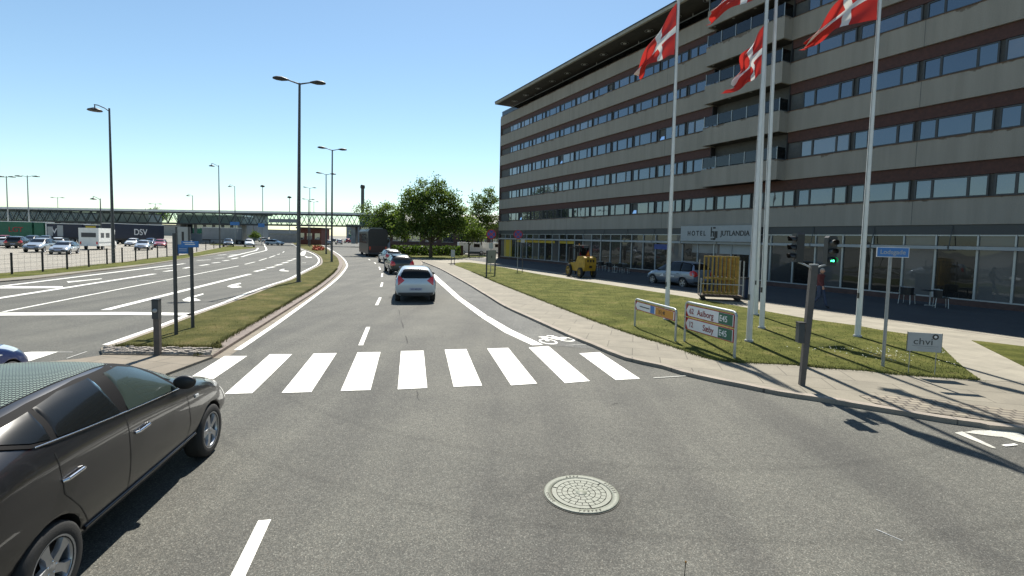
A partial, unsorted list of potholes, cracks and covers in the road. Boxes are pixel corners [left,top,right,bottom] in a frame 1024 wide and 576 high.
manhole cover [543,475,620,515]
